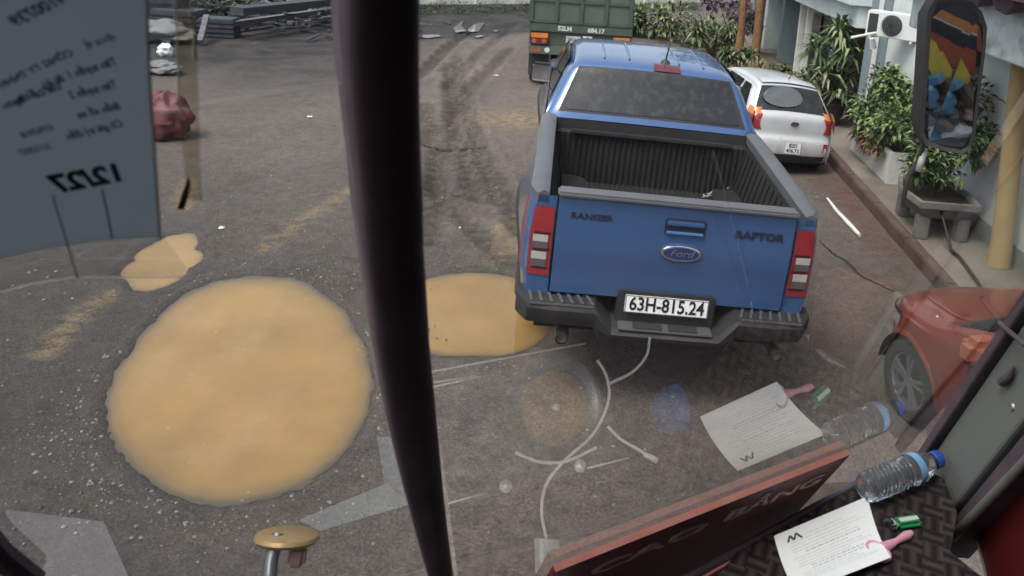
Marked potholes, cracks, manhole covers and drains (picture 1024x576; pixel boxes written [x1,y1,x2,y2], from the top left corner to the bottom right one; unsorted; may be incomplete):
crack [422,144,485,152]
crack [819,240,896,292]
